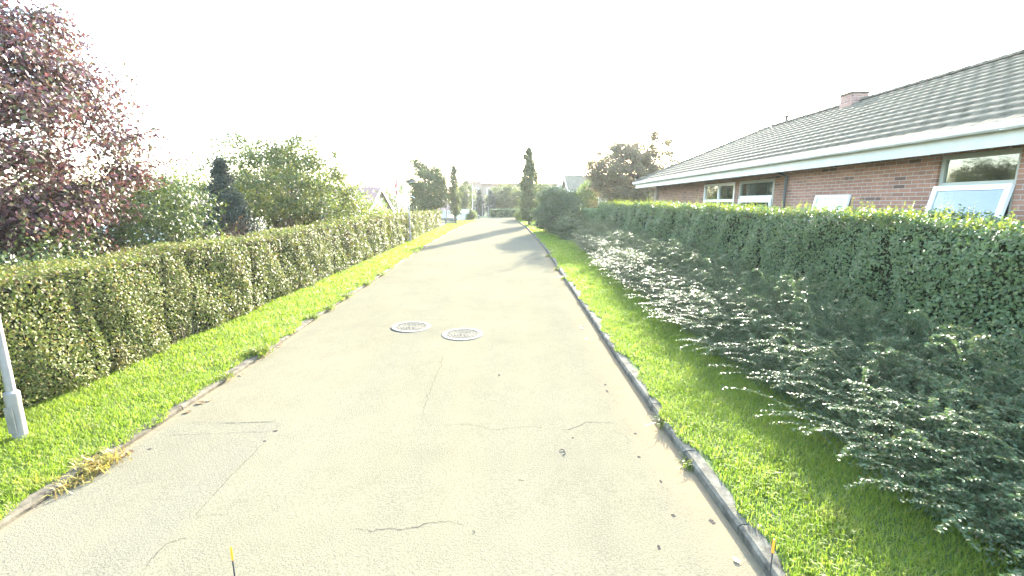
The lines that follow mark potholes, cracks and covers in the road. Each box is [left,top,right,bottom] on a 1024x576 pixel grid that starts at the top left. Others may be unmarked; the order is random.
manhole cover [441,328,484,341]
manhole cover [391,321,431,333]
